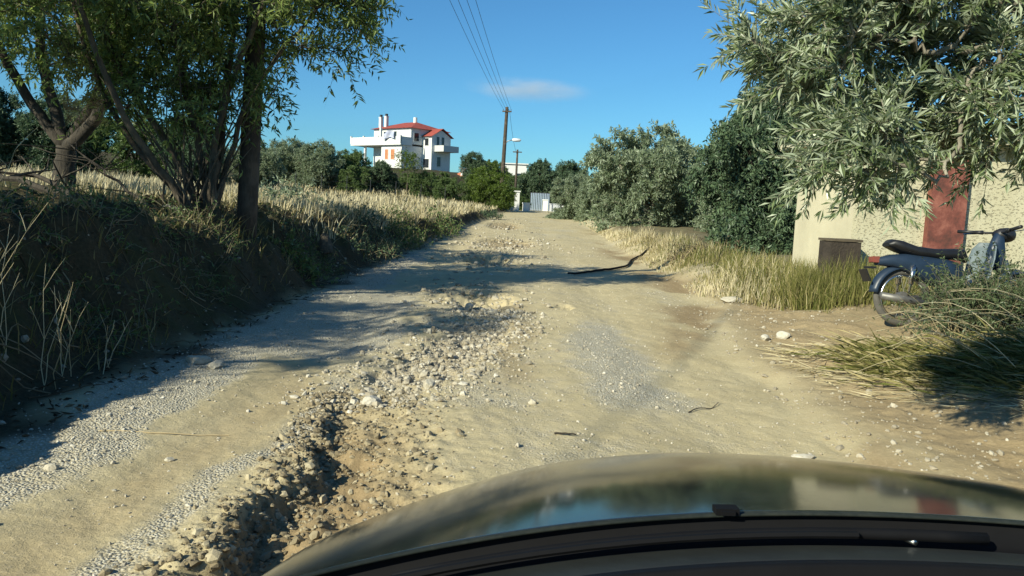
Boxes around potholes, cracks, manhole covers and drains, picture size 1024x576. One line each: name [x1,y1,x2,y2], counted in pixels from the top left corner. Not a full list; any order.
pothole [441,292,517,310]
pothole [180,398,430,576]
